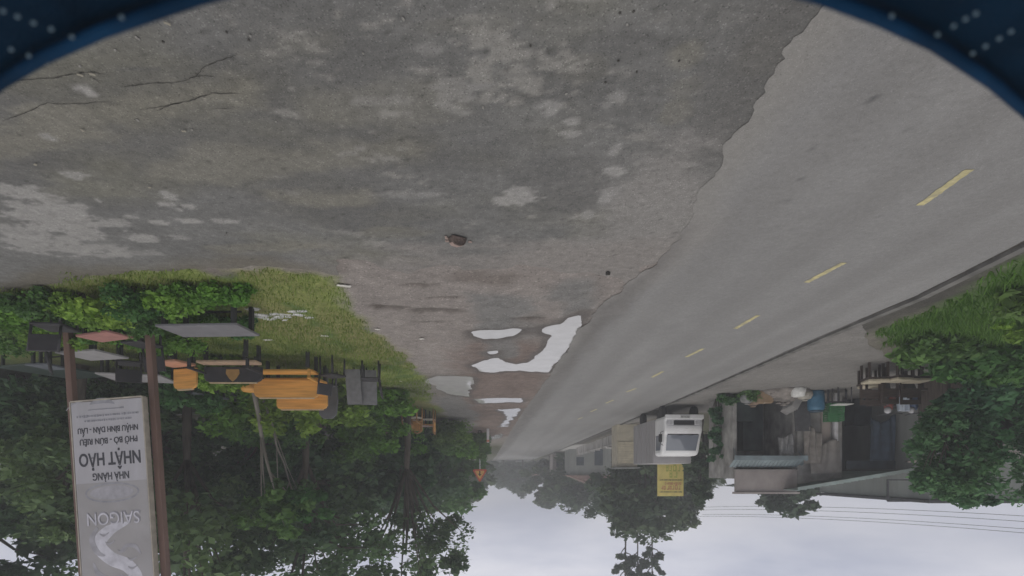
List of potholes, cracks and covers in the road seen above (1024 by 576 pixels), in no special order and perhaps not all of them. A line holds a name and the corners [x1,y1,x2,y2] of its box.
crack [126,55,238,110]
crack [20,72,105,81]
crack [0,102,95,122]
